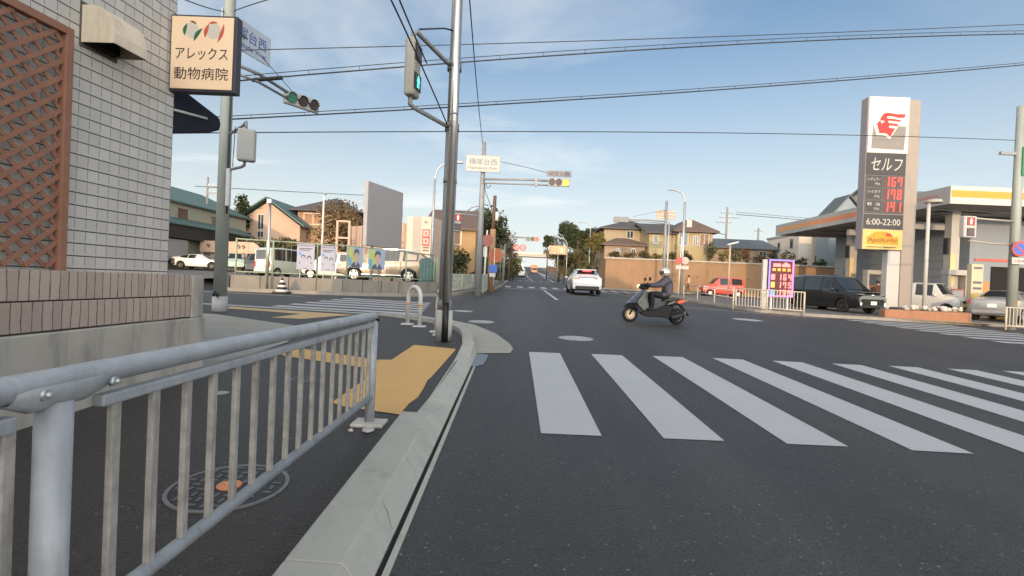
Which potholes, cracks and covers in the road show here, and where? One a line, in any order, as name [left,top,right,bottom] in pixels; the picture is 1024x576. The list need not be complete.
manhole cover [162,464,290,514]
